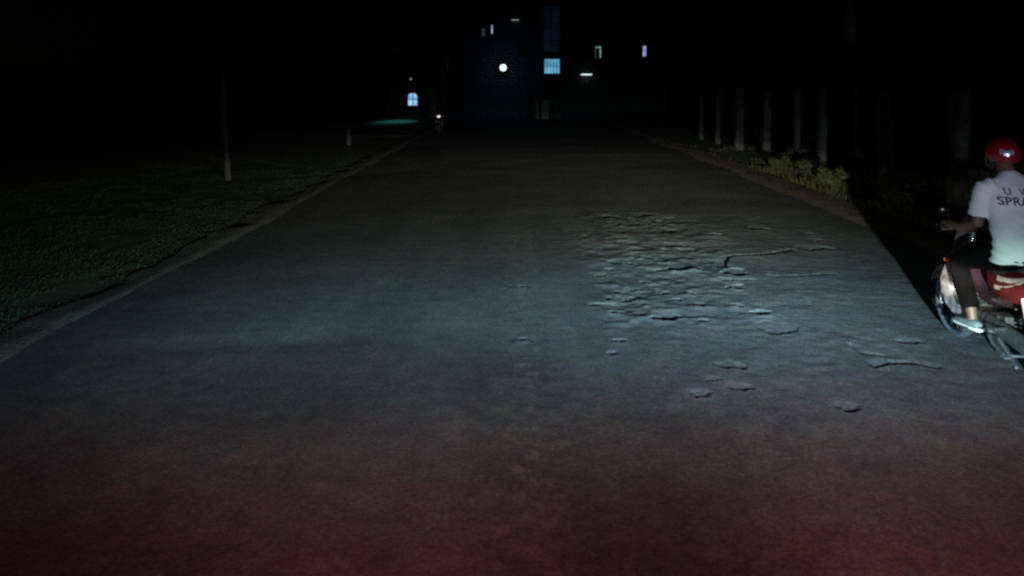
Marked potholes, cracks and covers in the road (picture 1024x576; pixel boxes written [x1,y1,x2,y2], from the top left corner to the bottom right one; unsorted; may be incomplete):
pothole [707,357,754,372]
pothole [824,397,868,415]
pothole [682,387,719,401]
crack [710,248,843,283]
pothole [718,379,762,394]
crack [840,342,939,371]
pothole [746,319,807,336]
